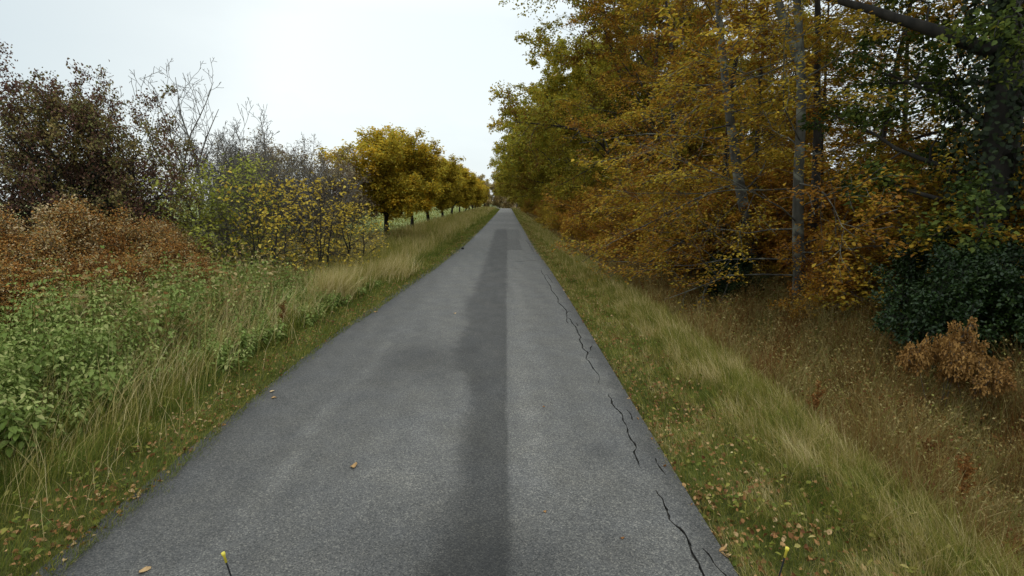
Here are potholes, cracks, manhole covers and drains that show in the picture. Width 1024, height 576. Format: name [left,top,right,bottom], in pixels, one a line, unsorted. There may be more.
crack [527,242,727,576]
